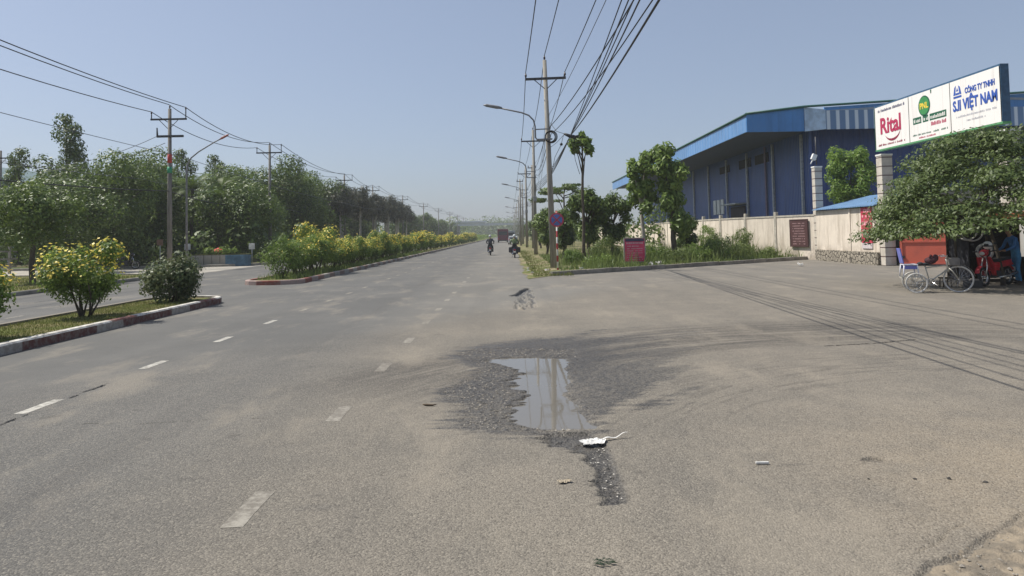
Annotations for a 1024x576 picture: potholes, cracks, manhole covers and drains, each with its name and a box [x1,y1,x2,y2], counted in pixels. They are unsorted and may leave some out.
pothole [439,348,606,437]
pothole [513,288,538,310]
